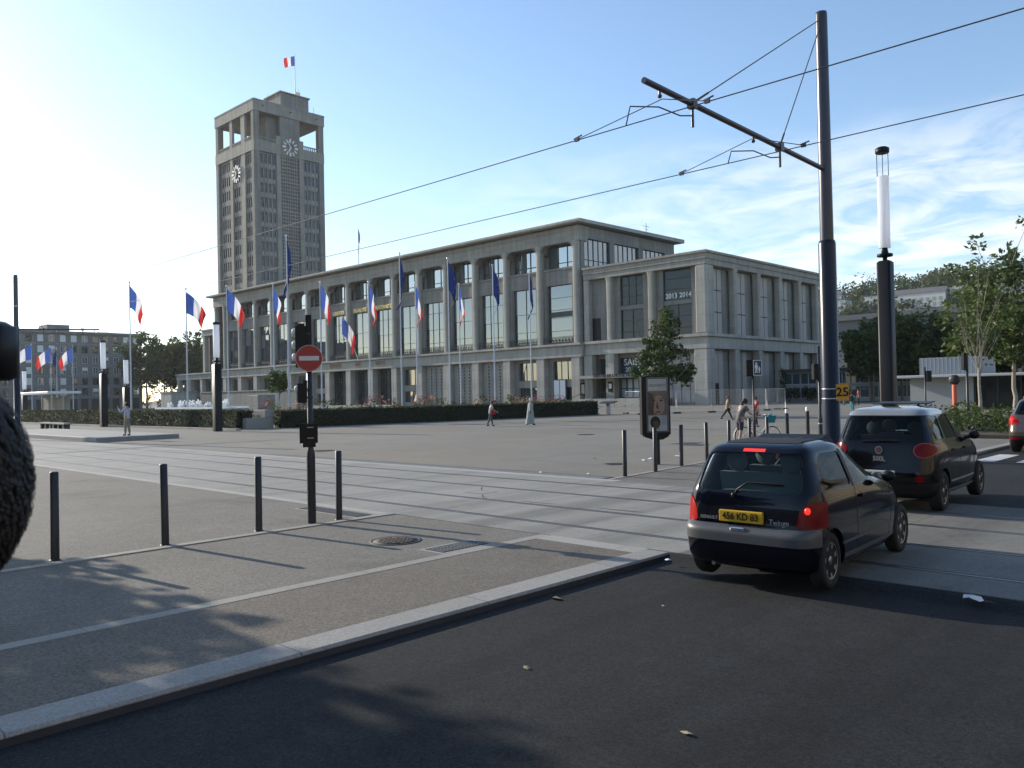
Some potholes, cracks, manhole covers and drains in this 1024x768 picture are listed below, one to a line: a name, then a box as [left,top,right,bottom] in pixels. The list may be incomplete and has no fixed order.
manhole cover [369,536,422,546]
drain grate [418,539,496,554]
